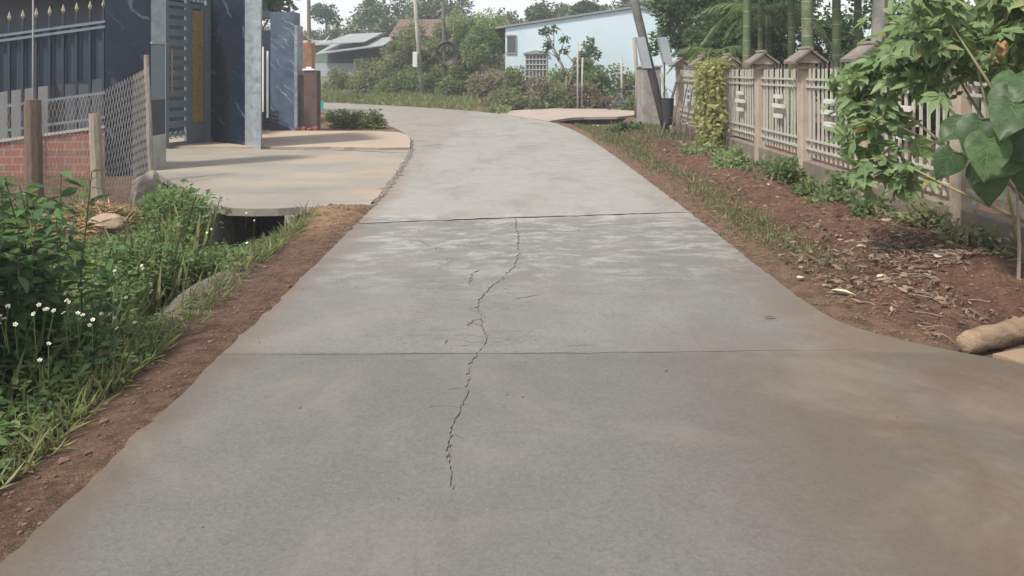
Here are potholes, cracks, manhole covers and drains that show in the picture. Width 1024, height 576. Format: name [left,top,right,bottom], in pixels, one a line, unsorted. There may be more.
crack [428,218,524,490]
